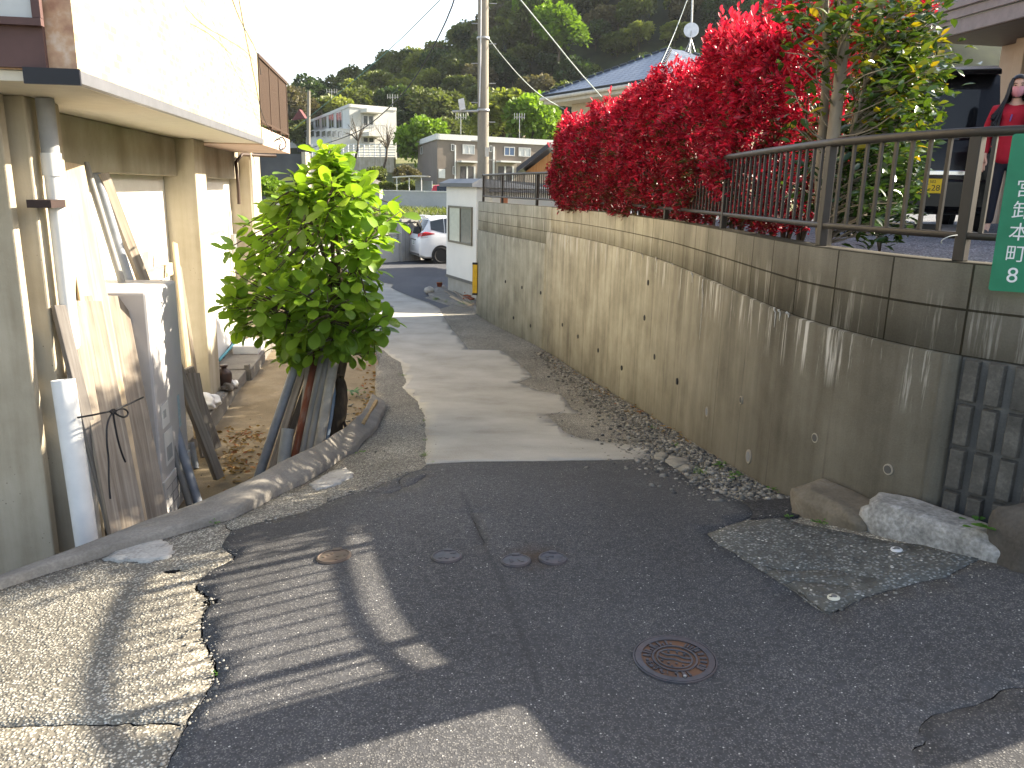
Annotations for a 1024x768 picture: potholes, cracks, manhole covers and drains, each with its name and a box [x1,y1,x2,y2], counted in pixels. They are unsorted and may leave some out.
utility cover [538,550,568,566]
utility cover [431,548,462,564]
utility cover [316,547,351,565]
crack [0,579,218,768]
manhole cover [633,635,718,684]
utility cover [501,553,531,568]
